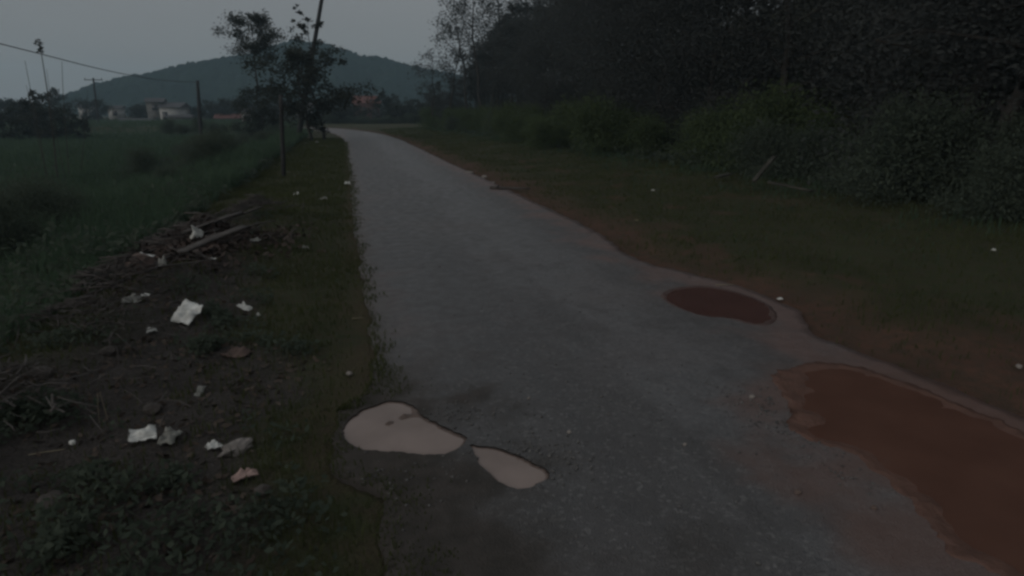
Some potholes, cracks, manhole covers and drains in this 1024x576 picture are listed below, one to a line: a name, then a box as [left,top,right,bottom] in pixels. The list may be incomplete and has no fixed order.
pothole [661,286,778,325]
pothole [342,400,467,455]
pothole [470,444,550,489]
